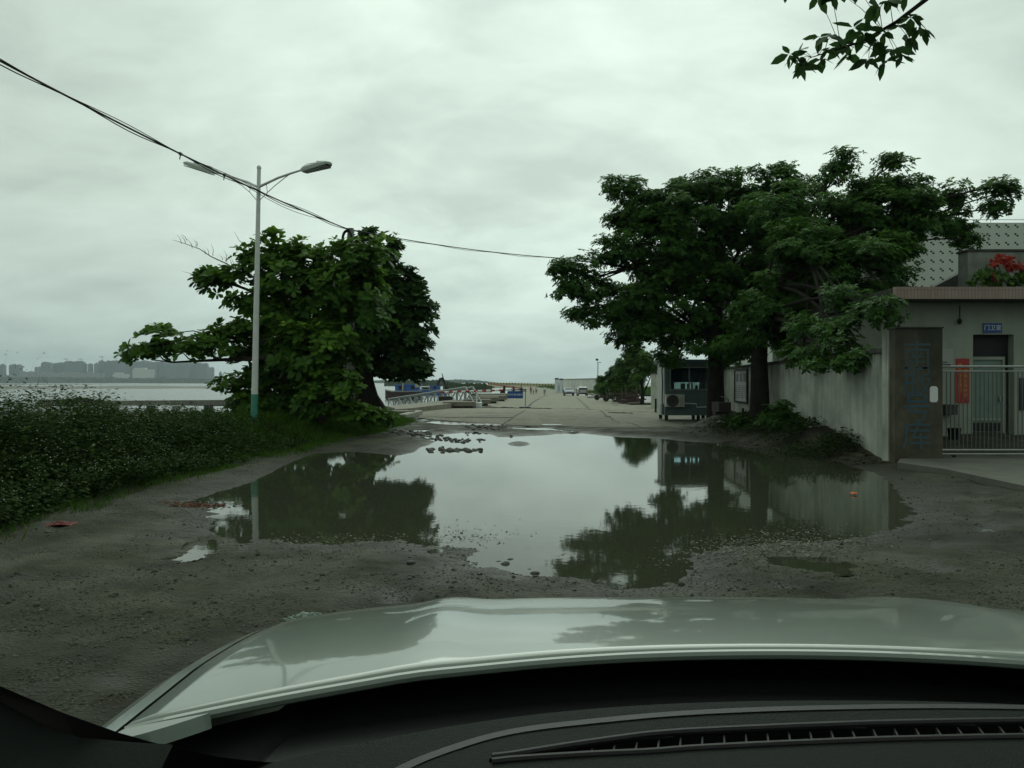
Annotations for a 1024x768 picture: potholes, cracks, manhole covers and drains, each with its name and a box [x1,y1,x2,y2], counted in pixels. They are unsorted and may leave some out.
pothole [171,431,926,590]
